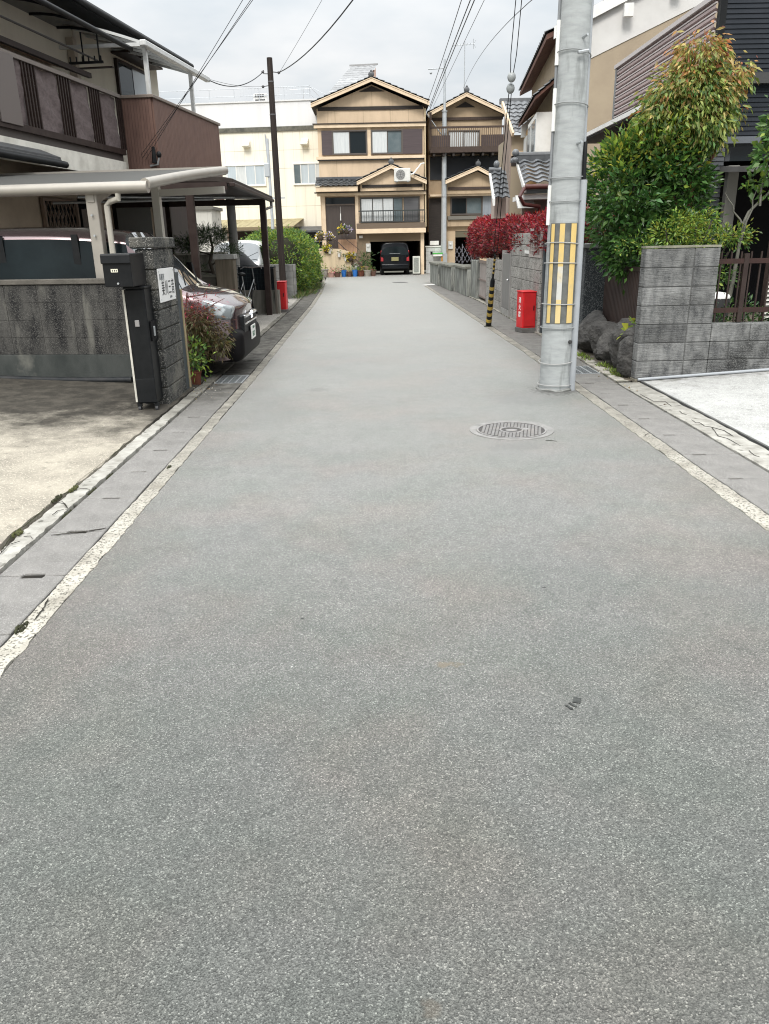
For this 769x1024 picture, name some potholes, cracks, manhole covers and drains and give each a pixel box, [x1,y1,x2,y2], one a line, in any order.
manhole cover [470,420,554,440]
drain grate [214,375,250,384]
drain grate [576,366,601,374]
